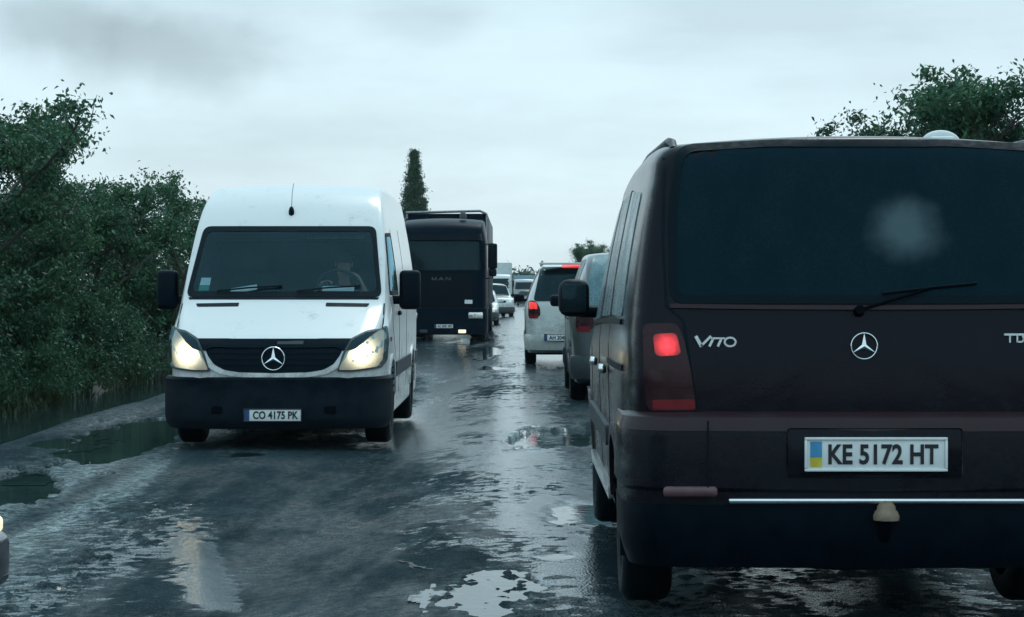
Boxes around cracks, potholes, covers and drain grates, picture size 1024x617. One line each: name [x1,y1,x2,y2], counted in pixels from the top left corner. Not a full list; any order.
pothole [505,422,592,451]
pothole [29,416,182,474]
pothole [0,459,78,507]
pothole [430,564,552,617]
